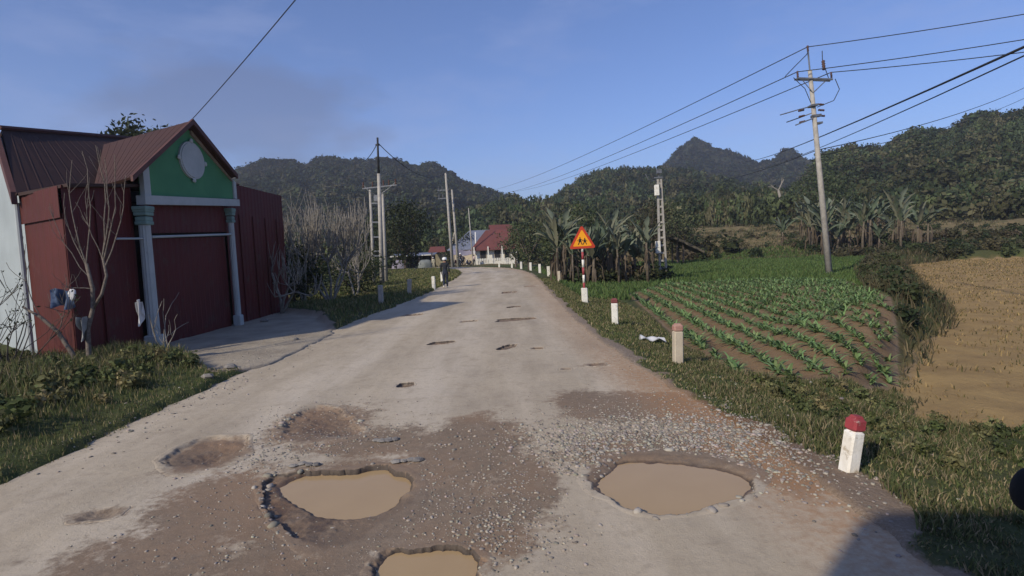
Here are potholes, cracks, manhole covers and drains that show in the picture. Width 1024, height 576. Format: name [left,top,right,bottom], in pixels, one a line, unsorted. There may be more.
pothole [152,433,255,477]
pothole [359,541,496,576]
pothole [252,462,429,560]
pothole [64,506,131,525]
pothole [494,343,519,351]
pothole [271,403,369,446]
pothole [576,449,772,520]
